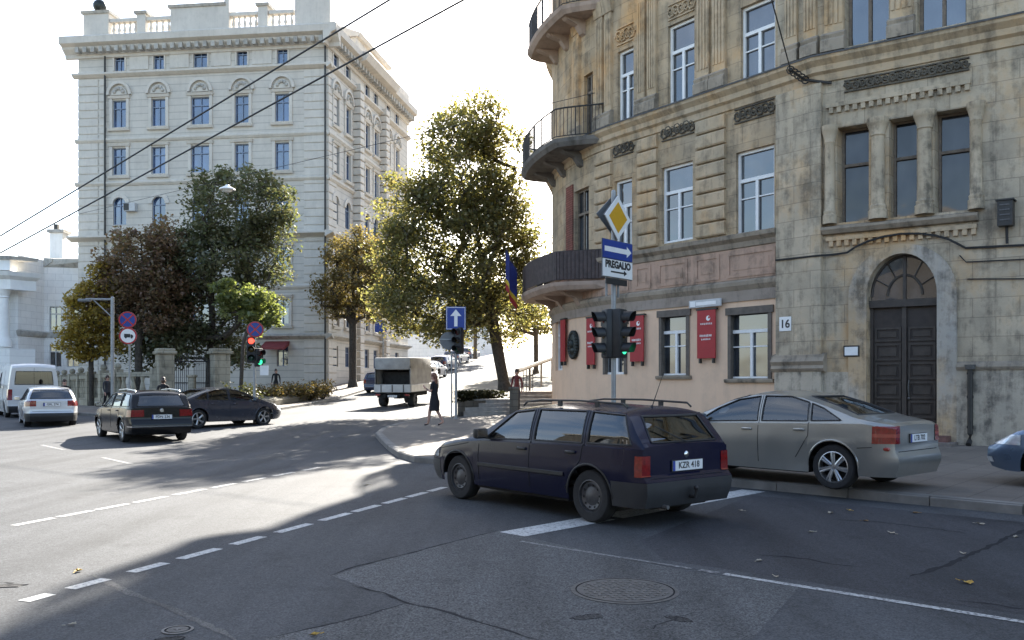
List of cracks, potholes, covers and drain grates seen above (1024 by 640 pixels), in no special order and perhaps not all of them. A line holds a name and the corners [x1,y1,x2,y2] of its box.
utility cover [161,625,194,635]
manhole cover [571,578,679,605]
